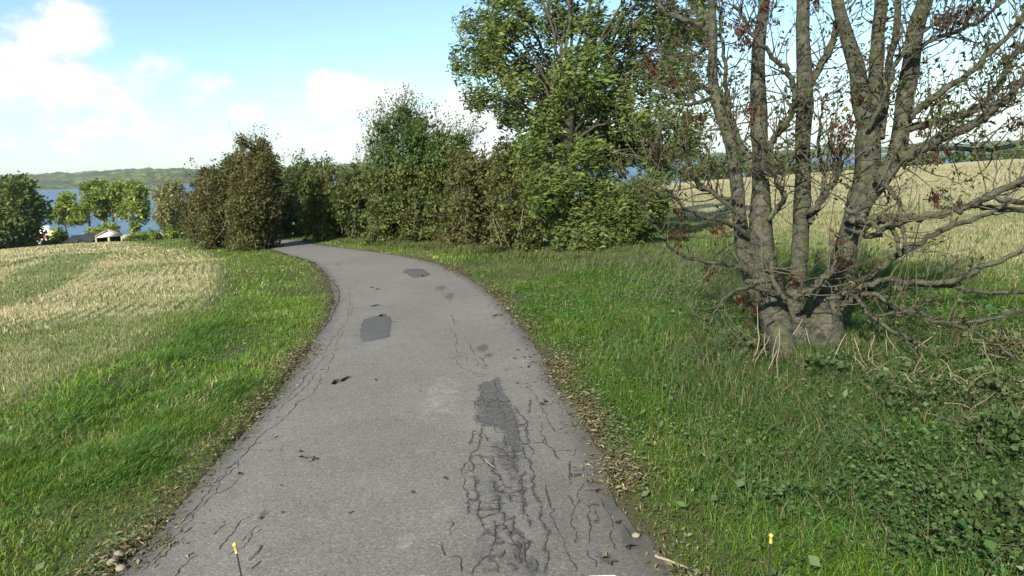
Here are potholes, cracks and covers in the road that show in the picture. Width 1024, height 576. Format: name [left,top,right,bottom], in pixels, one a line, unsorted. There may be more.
crack [450,314,630,572]
crack [142,261,352,576]
